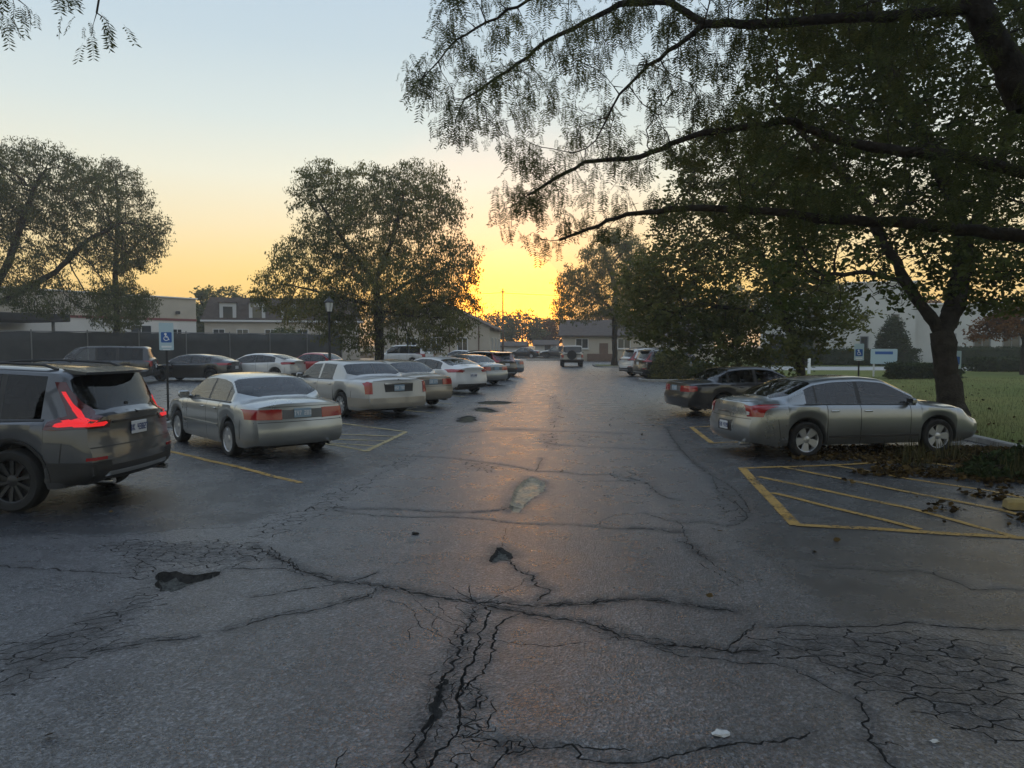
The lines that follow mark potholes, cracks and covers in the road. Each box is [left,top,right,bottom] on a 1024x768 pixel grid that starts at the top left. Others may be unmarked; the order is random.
pothole [489,547,513,563]
pothole [154,571,221,592]
crack [0,396,1024,768]
